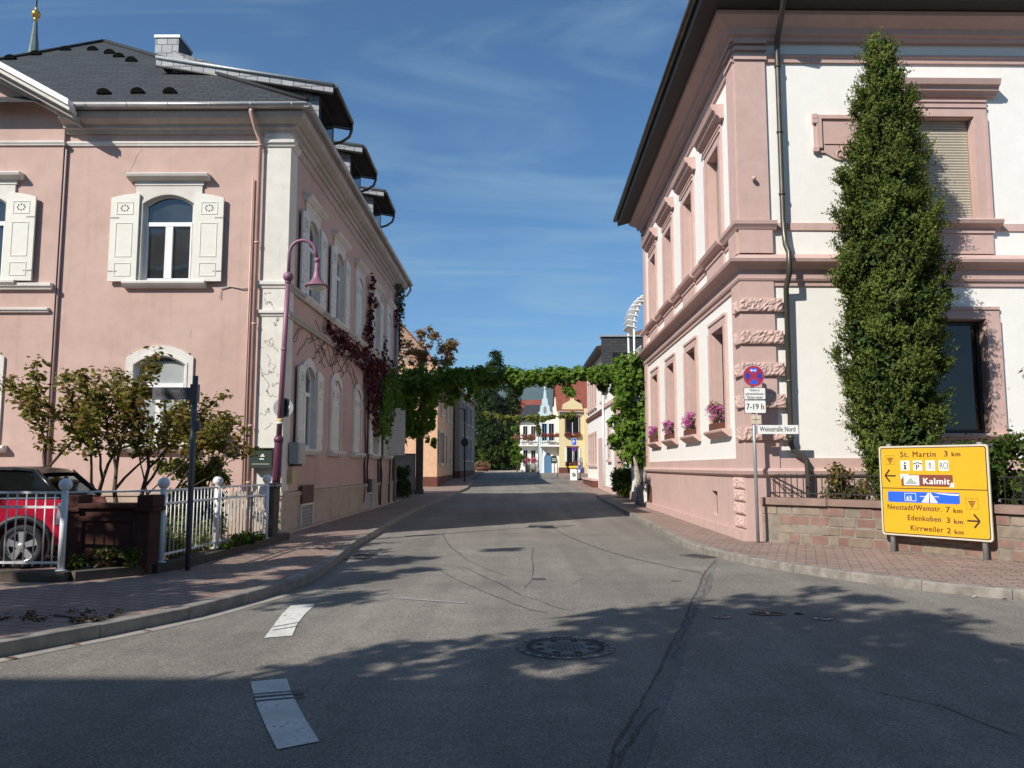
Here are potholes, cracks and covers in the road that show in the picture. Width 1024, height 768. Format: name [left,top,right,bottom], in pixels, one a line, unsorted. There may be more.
manhole cover [516,636,616,660]
crack [438,535,567,613]
